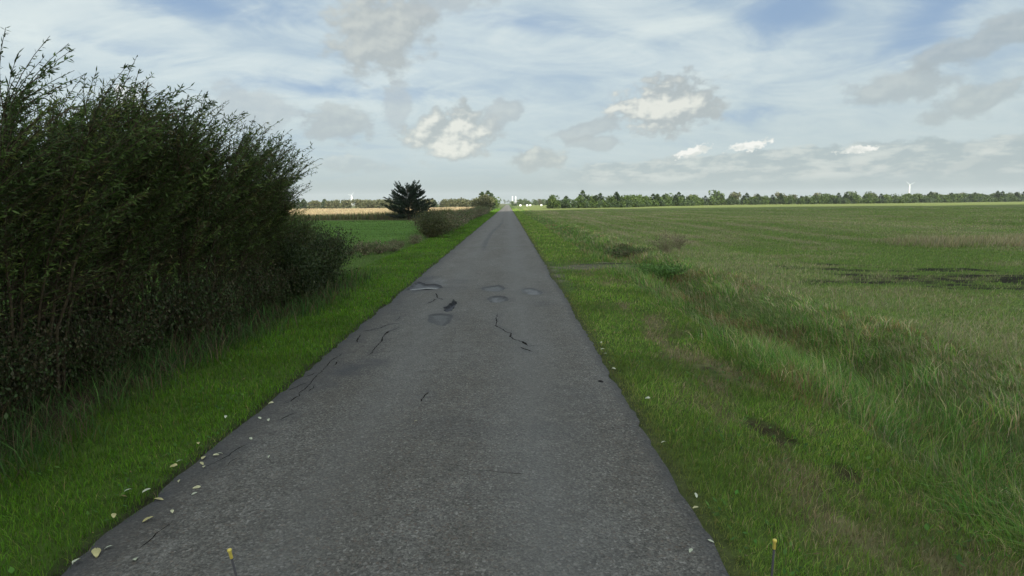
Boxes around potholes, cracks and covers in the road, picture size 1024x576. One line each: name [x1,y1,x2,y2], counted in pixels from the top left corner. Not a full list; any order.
crack [495,314,535,352]
pothole [427,313,453,326]
crack [280,356,338,420]
